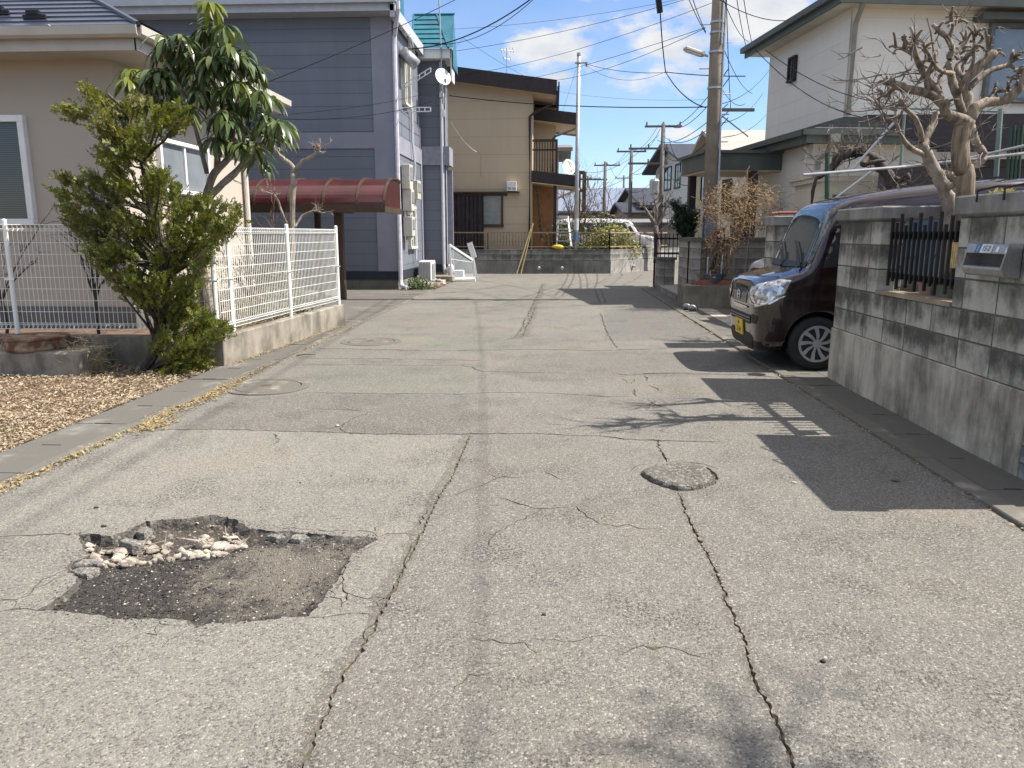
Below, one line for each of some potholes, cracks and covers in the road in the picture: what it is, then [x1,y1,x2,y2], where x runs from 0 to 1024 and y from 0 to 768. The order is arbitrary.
crack [134,372,795,768]
pothole [36,512,379,633]
crack [0,569,67,612]
manhole cover [224,378,310,396]
manhole cover [341,337,401,346]
